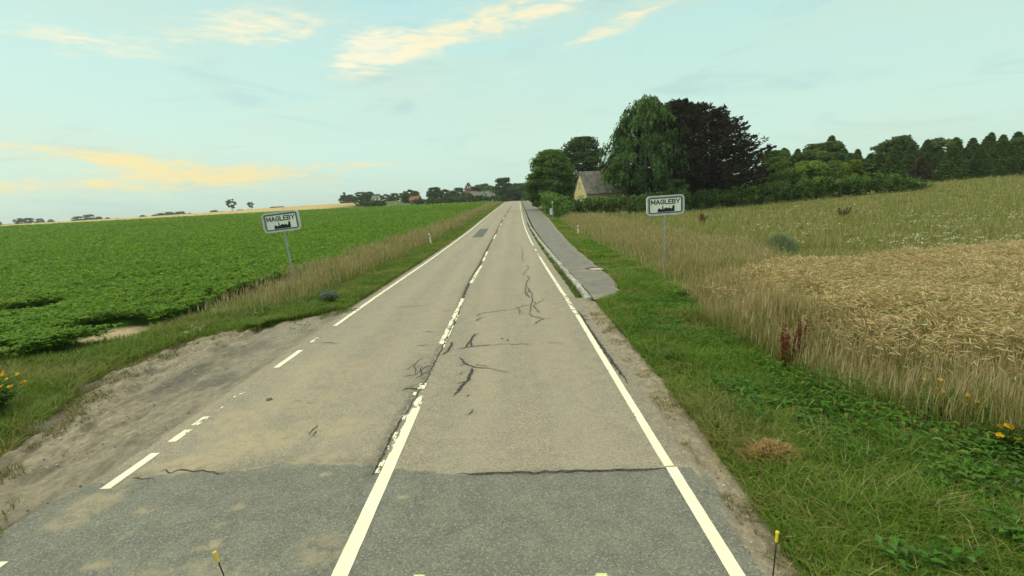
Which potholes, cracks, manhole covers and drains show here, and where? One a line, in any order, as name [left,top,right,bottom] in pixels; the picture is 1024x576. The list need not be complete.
crack [578,311,628,384]
crack [134,469,225,479]
crack [372,207,550,475]
